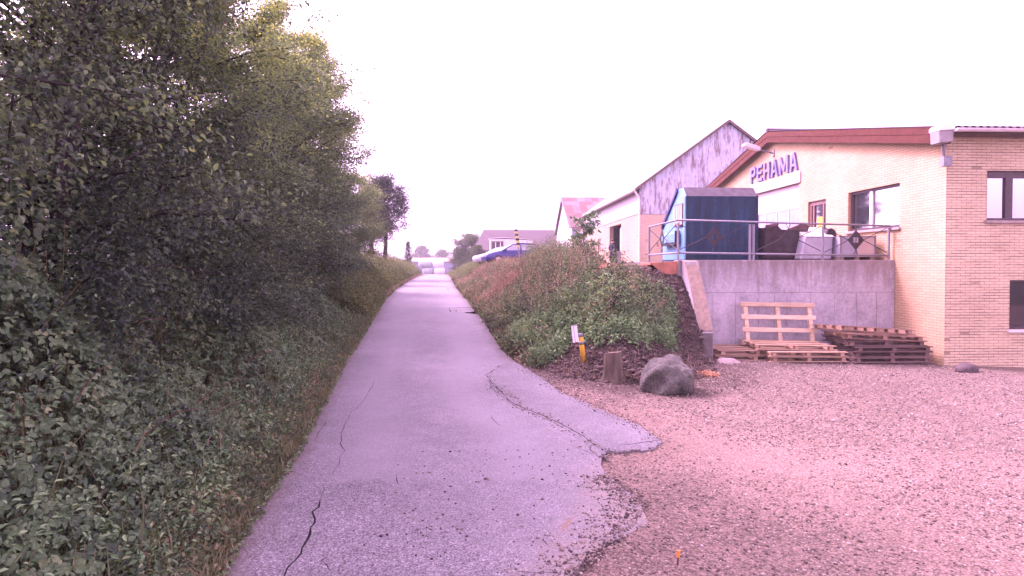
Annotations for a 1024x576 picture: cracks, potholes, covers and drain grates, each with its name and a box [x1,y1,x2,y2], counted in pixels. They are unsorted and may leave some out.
crack [284,382,374,576]
